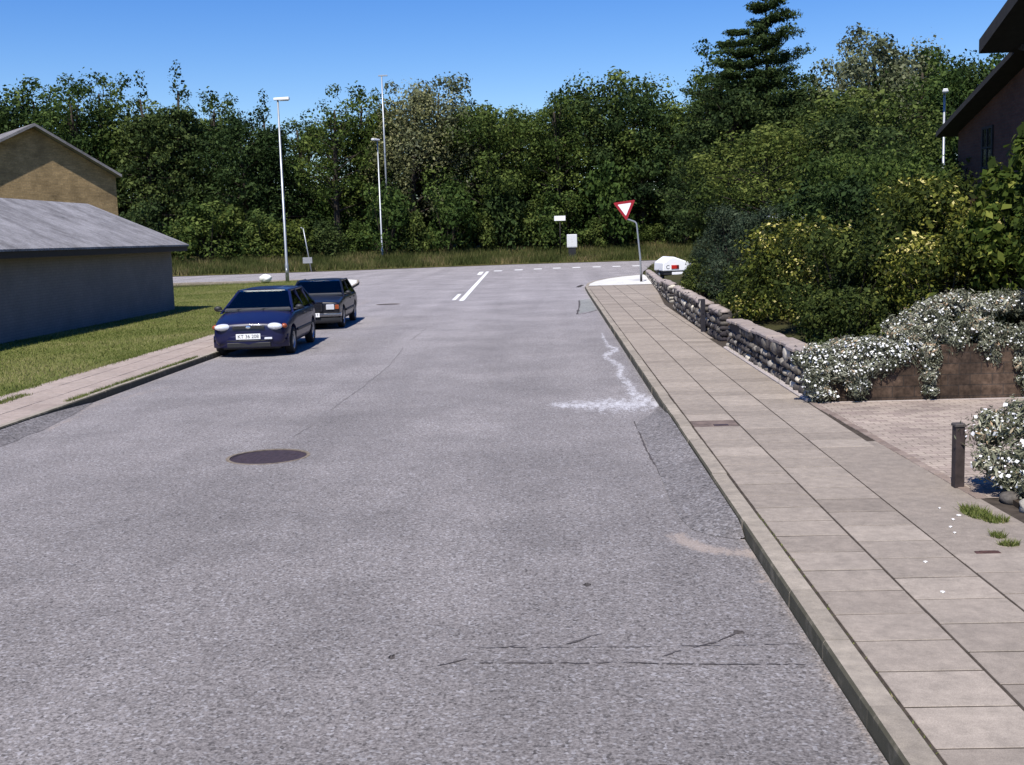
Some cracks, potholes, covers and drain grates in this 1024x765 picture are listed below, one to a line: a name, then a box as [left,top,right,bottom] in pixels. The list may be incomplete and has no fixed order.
crack [634,421,660,475]
manhole cover [226,449,310,465]
crack [294,330,424,436]
